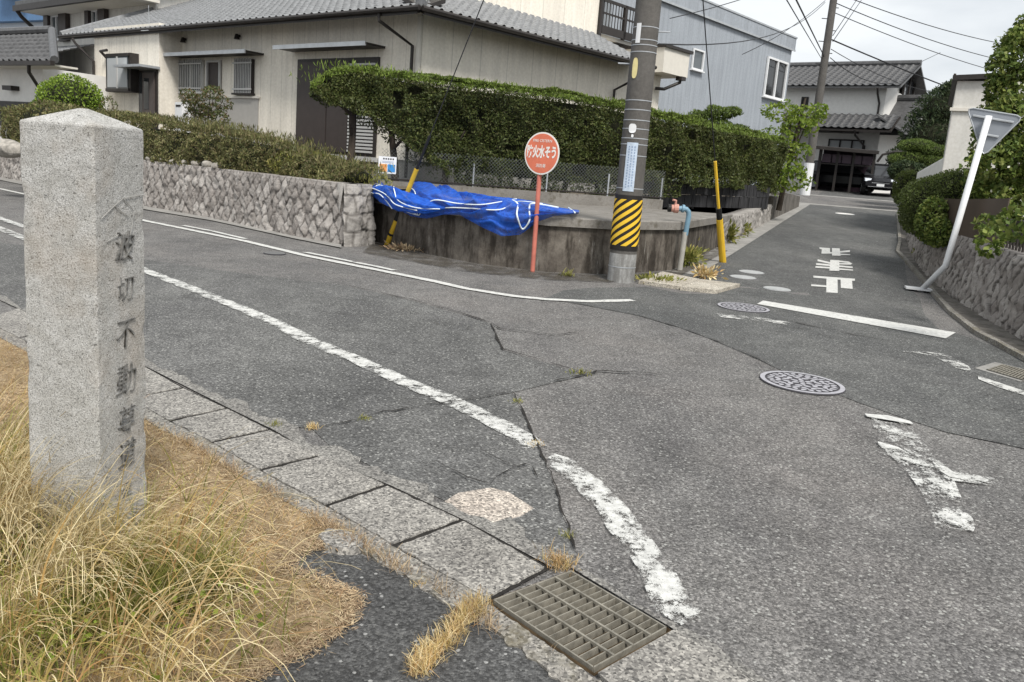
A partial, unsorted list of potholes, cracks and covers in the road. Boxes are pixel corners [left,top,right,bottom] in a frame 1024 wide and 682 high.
drain grate [489,570,671,676]
manhole cover [759,371,846,395]
crack [316,391,575,548]
manhole cover [717,302,770,313]
